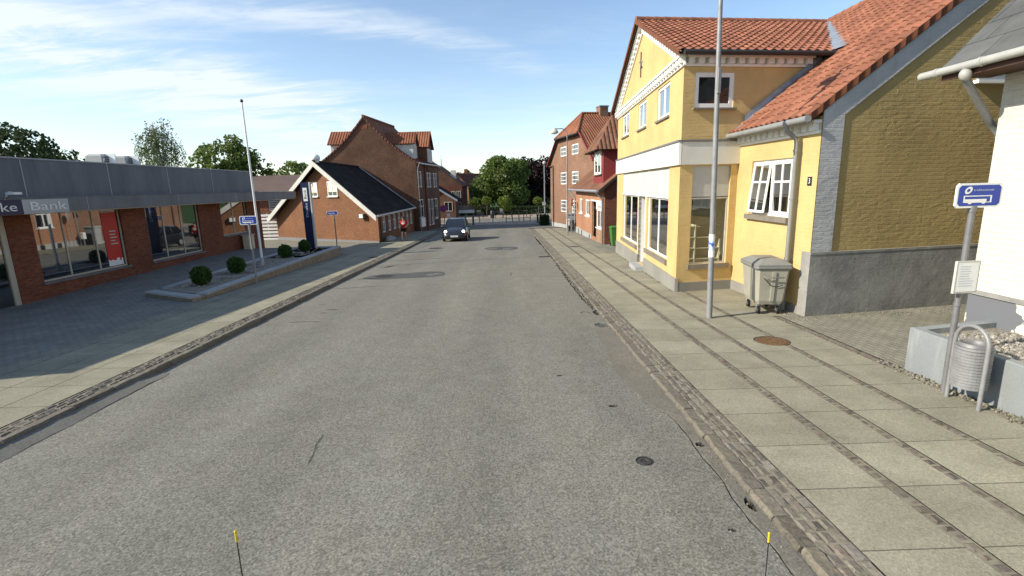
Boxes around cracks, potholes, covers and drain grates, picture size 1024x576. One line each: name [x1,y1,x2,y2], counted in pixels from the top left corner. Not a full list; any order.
crack [645,402,794,576]
manhole cover [753,336,791,346]
manhole cover [635,456,654,466]
